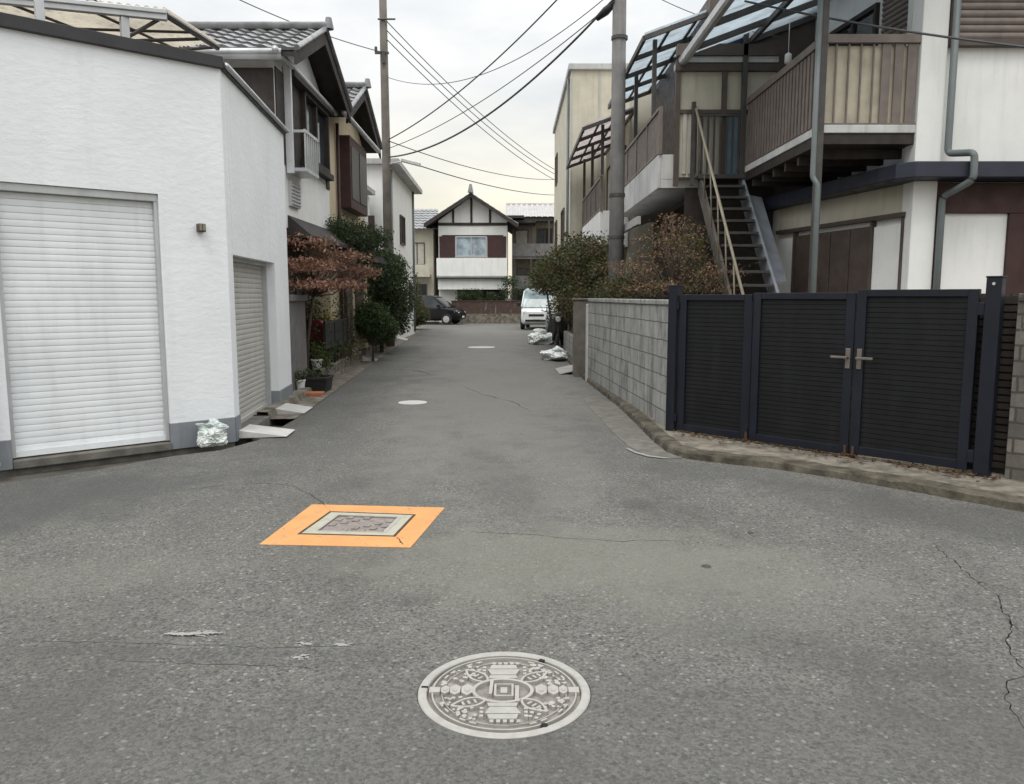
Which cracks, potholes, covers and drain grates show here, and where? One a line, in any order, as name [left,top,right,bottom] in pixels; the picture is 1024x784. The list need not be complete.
manhole cover [298,511,416,537]
manhole cover [418,652,590,739]
crack [59,641,367,671]
crack [472,531,664,542]
crack [916,531,1024,728]
